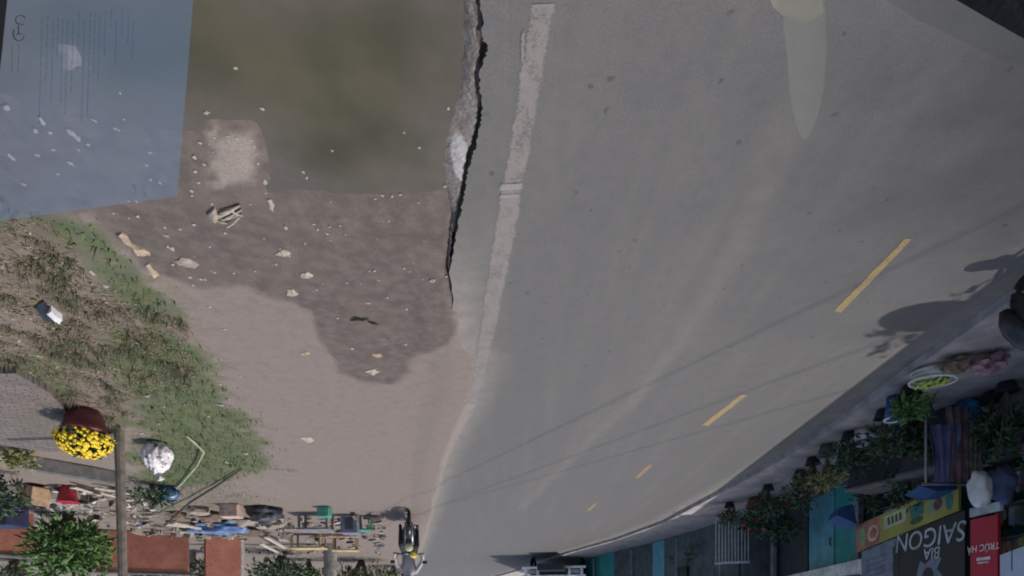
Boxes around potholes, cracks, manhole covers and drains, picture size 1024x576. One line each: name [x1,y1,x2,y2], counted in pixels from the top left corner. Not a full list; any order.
crack [449,0,488,270]
